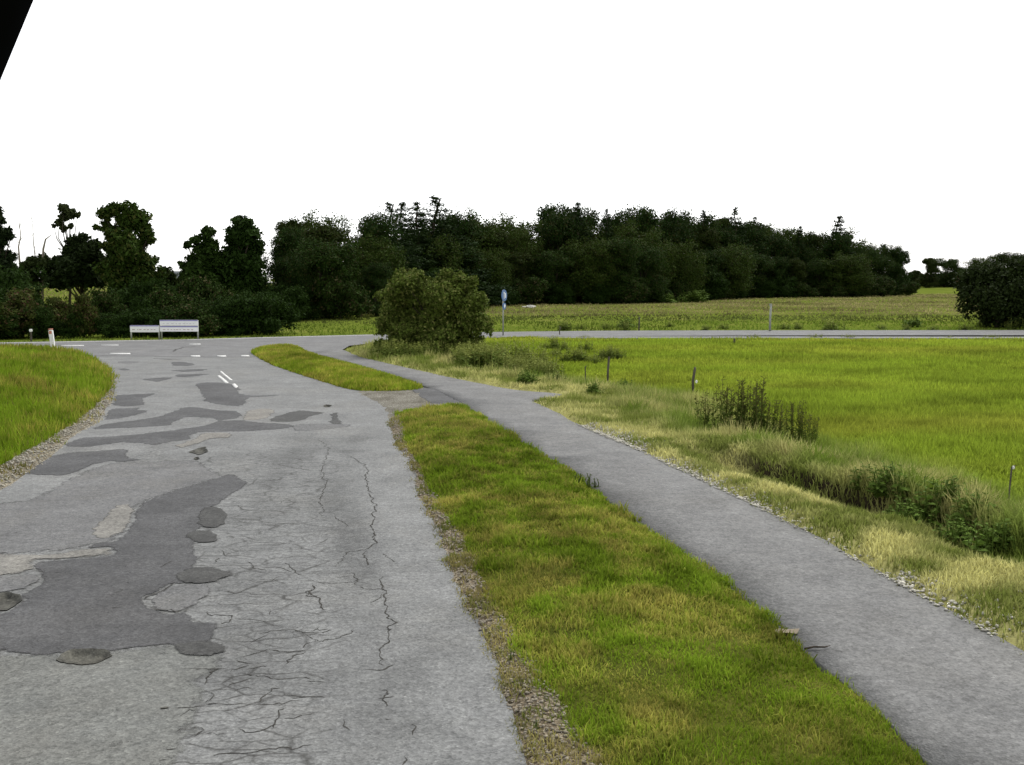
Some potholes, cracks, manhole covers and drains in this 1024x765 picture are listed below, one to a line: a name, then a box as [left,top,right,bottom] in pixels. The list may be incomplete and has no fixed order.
crack [177,455,398,756]
crack [281,441,347,527]
